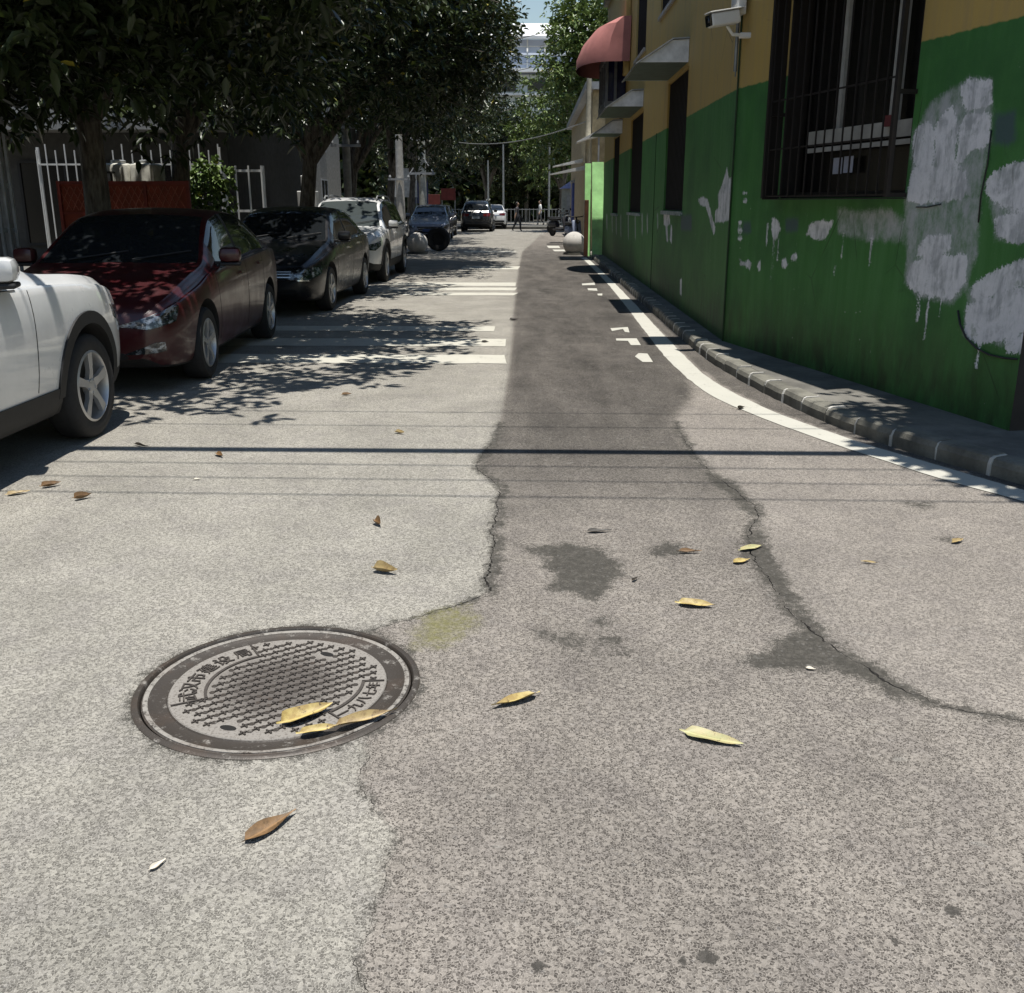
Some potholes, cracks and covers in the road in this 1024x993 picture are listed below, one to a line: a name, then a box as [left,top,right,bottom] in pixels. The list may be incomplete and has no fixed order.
crack [369,424,501,632]
manhole cover [130,626,420,760]
crack [677,428,1021,721]
crack [353,754,397,991]
